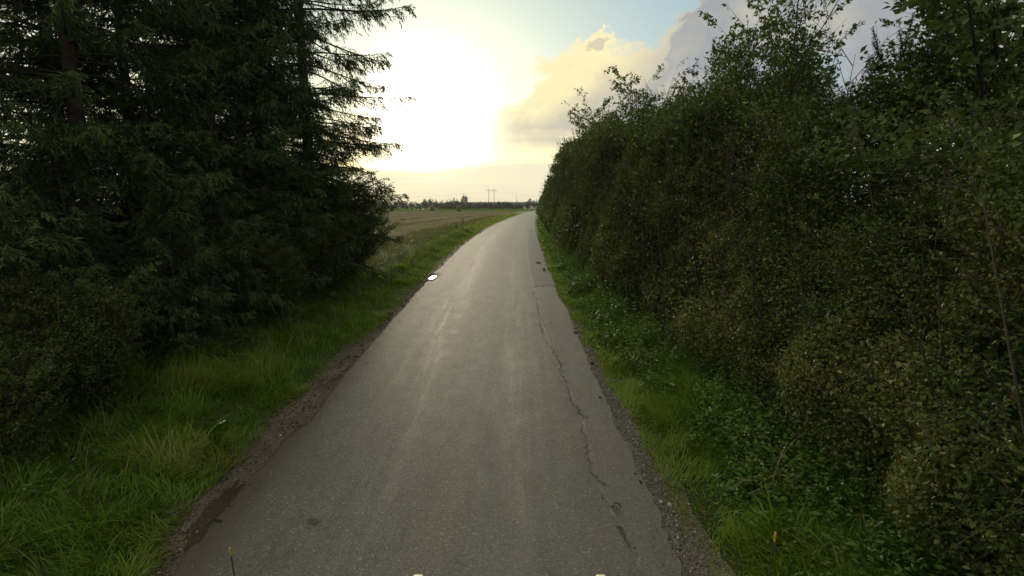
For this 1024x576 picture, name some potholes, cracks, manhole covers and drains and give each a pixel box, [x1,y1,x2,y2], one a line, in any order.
crack [575,407,635,548]
